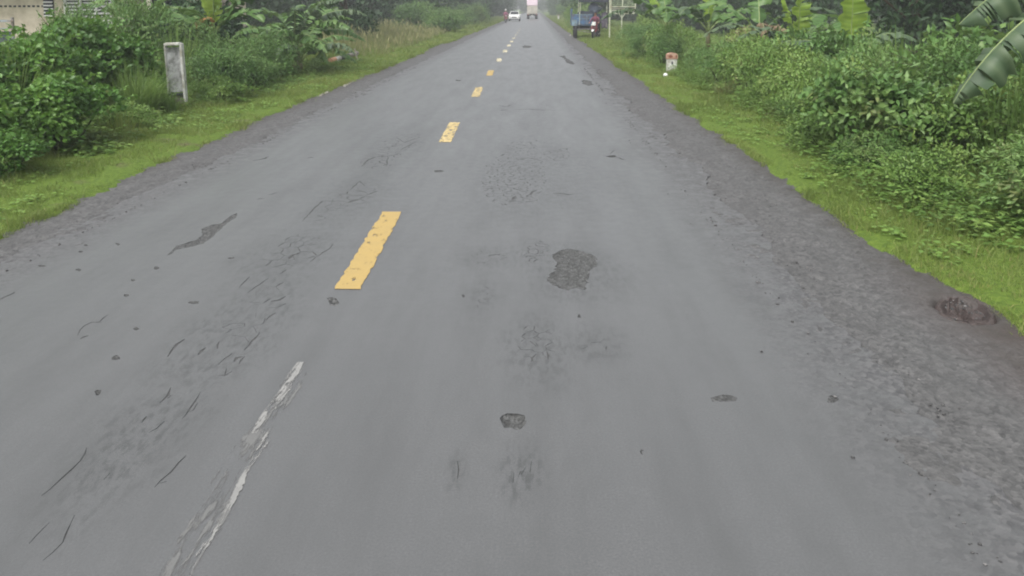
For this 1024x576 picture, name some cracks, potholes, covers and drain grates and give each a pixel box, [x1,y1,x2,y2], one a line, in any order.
crack [518,326,553,362]
pothole [935,296,997,325]
pothole [500,413,526,430]
crack [481,140,569,205]
crack [142,388,200,432]
crack [304,133,415,221]
crack [29,515,75,559]
crack [43,447,87,495]
crack [167,236,333,376]
